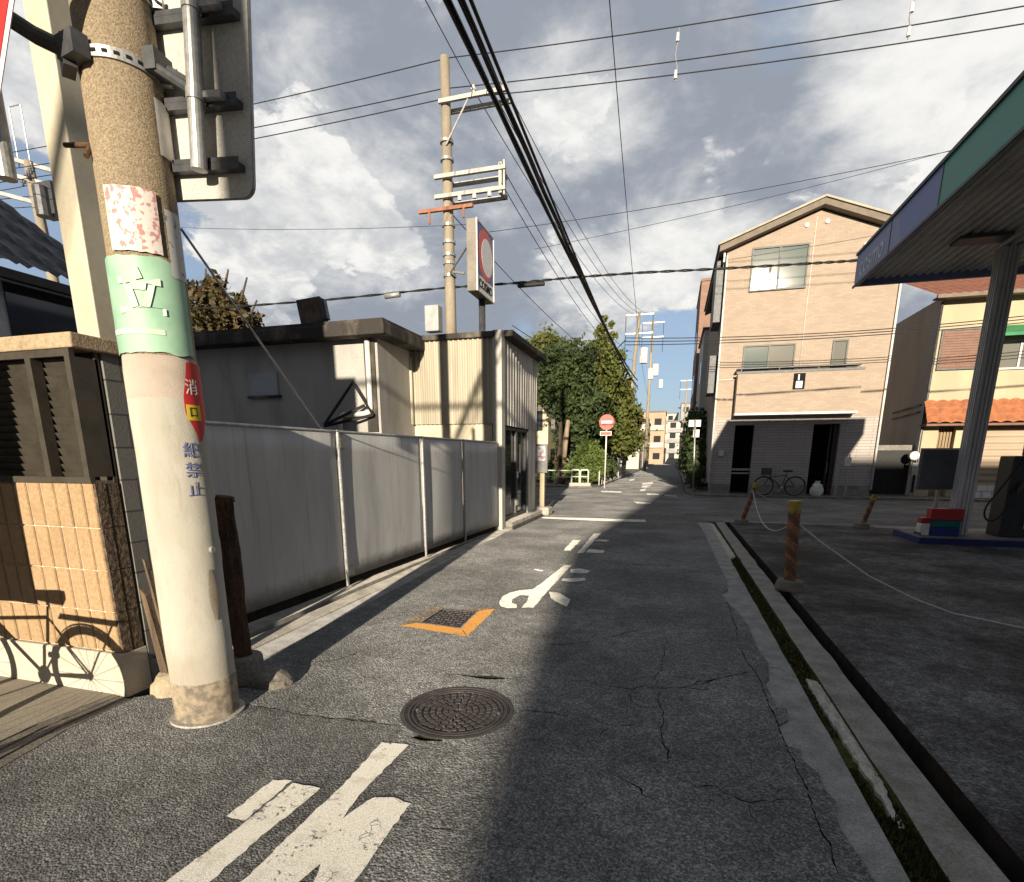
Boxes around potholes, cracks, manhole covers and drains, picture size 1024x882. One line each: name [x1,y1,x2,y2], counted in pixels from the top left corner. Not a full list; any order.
crack [522,603,839,876]
manhole cover [400,687,514,740]
